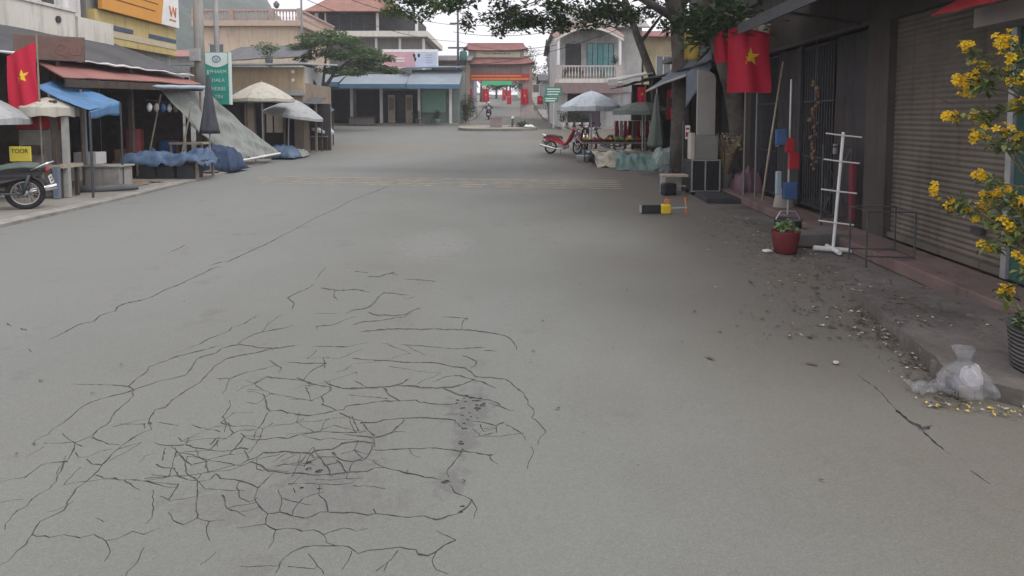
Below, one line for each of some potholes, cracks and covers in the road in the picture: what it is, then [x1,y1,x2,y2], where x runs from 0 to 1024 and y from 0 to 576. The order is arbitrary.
crack [860,376,990,484]
crack [0,270,546,576]
crack [7,182,397,352]
